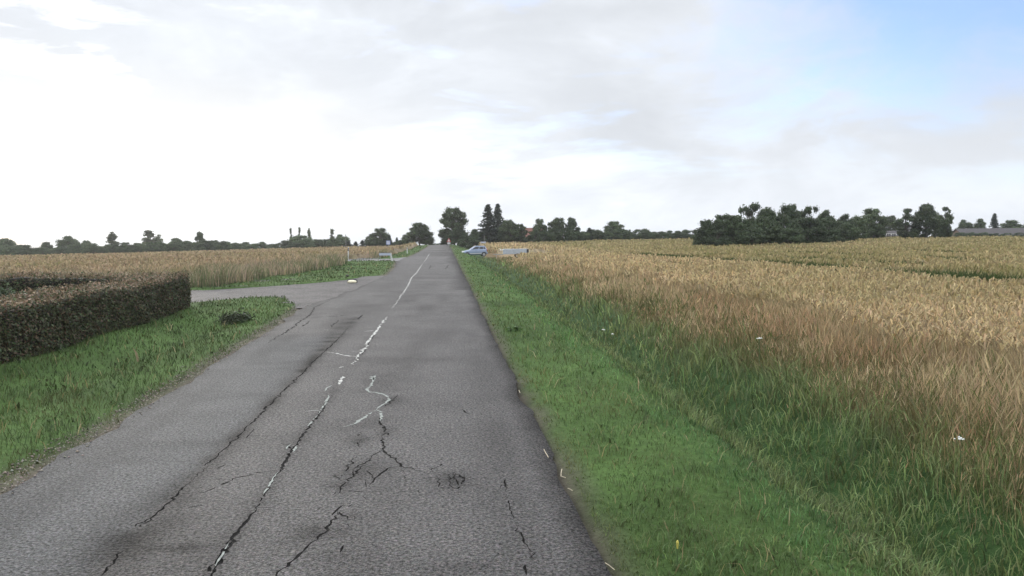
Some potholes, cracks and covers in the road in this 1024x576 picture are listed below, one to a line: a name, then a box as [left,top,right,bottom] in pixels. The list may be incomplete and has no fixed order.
crack [268,302,363,343]
crack [503,479,536,575]
crack [203,376,501,576]
